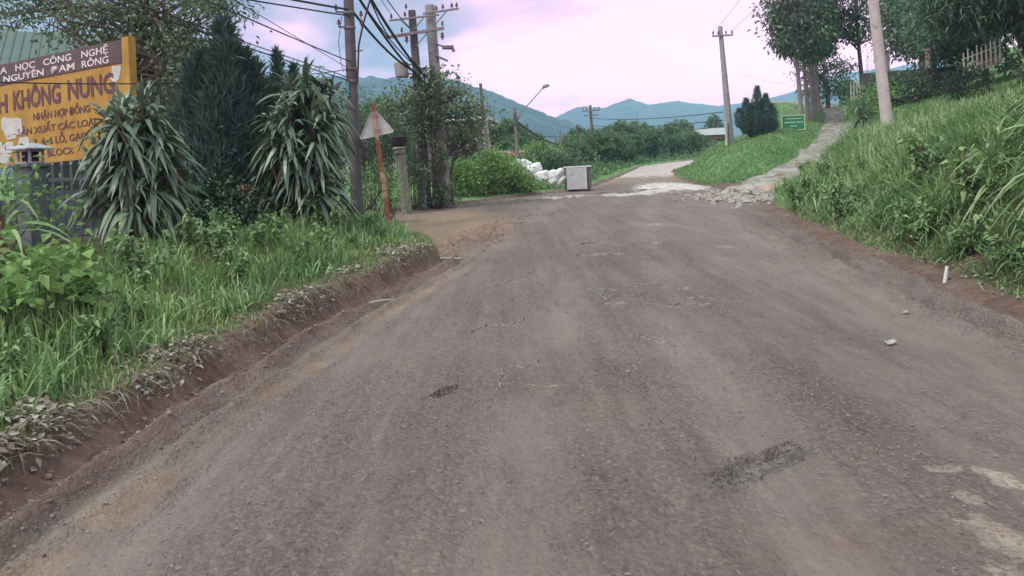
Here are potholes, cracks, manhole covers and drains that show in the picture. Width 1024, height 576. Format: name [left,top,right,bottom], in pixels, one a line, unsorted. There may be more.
crack [497,359,543,389]
crack [471,317,525,332]
pothole [429,385,459,398]
pothole [703,439,821,490]
crack [585,283,721,310]
crack [634,331,676,347]
